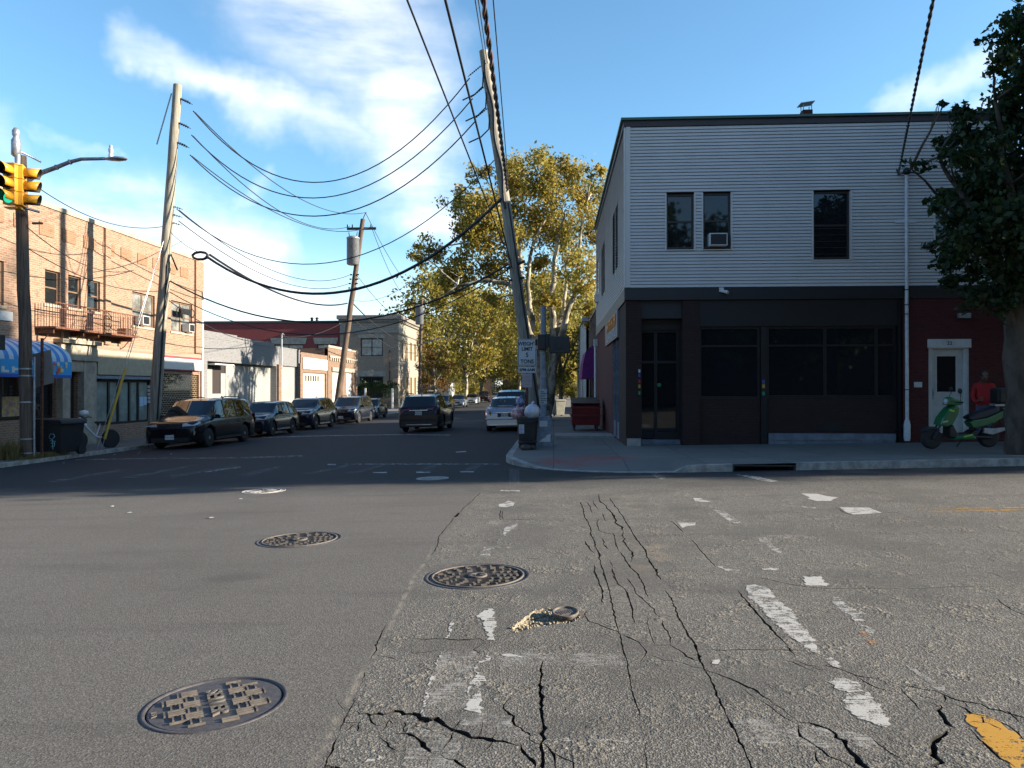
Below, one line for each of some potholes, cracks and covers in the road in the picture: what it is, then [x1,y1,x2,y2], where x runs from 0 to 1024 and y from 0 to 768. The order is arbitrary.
manhole cover [139,676,288,735]
pothole [509,607,580,633]
manhole cover [256,531,342,548]
crack [324,493,1024,768]
drain grate [733,463,796,472]
manhole cover [425,563,530,590]
